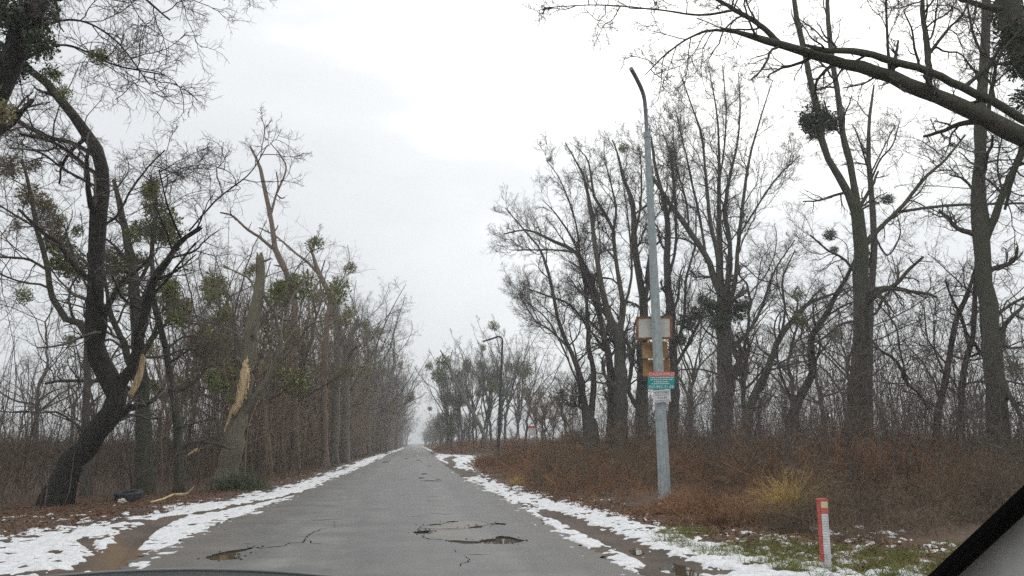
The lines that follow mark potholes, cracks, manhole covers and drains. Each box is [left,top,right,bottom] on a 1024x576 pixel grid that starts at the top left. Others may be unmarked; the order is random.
crack [412,515,488,567]
pothole [197,545,264,561]
crack [244,519,335,549]
pothole [479,535,528,544]
